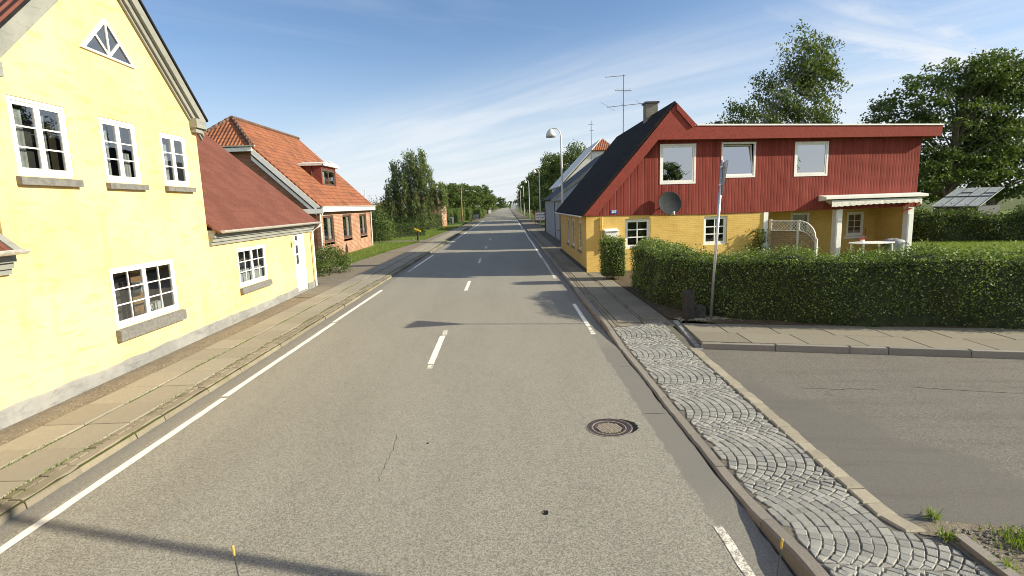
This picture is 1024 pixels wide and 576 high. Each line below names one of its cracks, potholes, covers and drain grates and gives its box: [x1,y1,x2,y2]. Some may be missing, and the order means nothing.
manhole cover [586,418,633,437]
